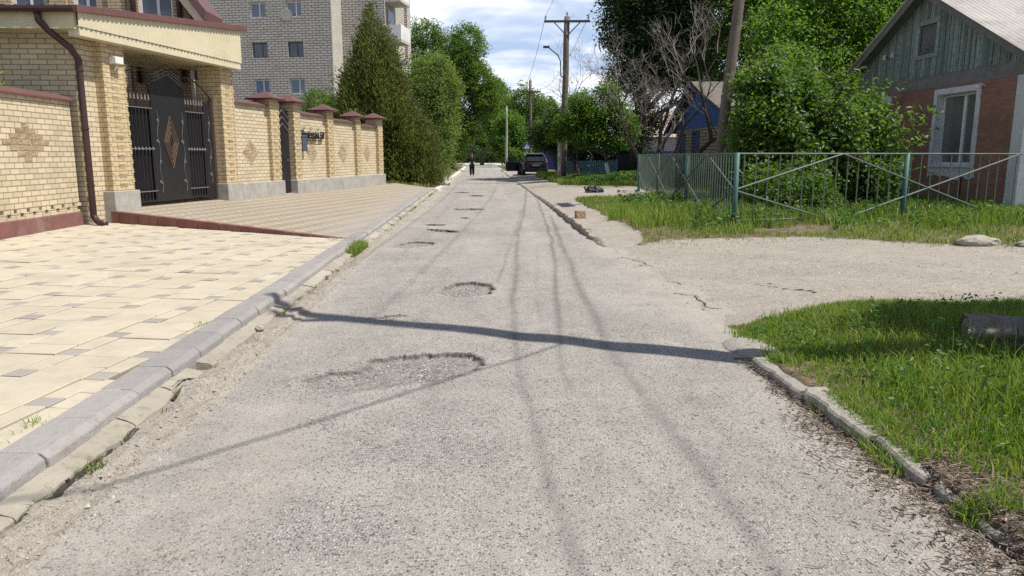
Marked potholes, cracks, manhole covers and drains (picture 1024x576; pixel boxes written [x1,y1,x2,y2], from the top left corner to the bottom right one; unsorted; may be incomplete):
crack [748,283,814,293]
crack [623,257,652,267]
pothole [387,241,440,249]
pothole [425,280,501,299]
pothole [277,350,493,398]
crack [670,282,721,310]
